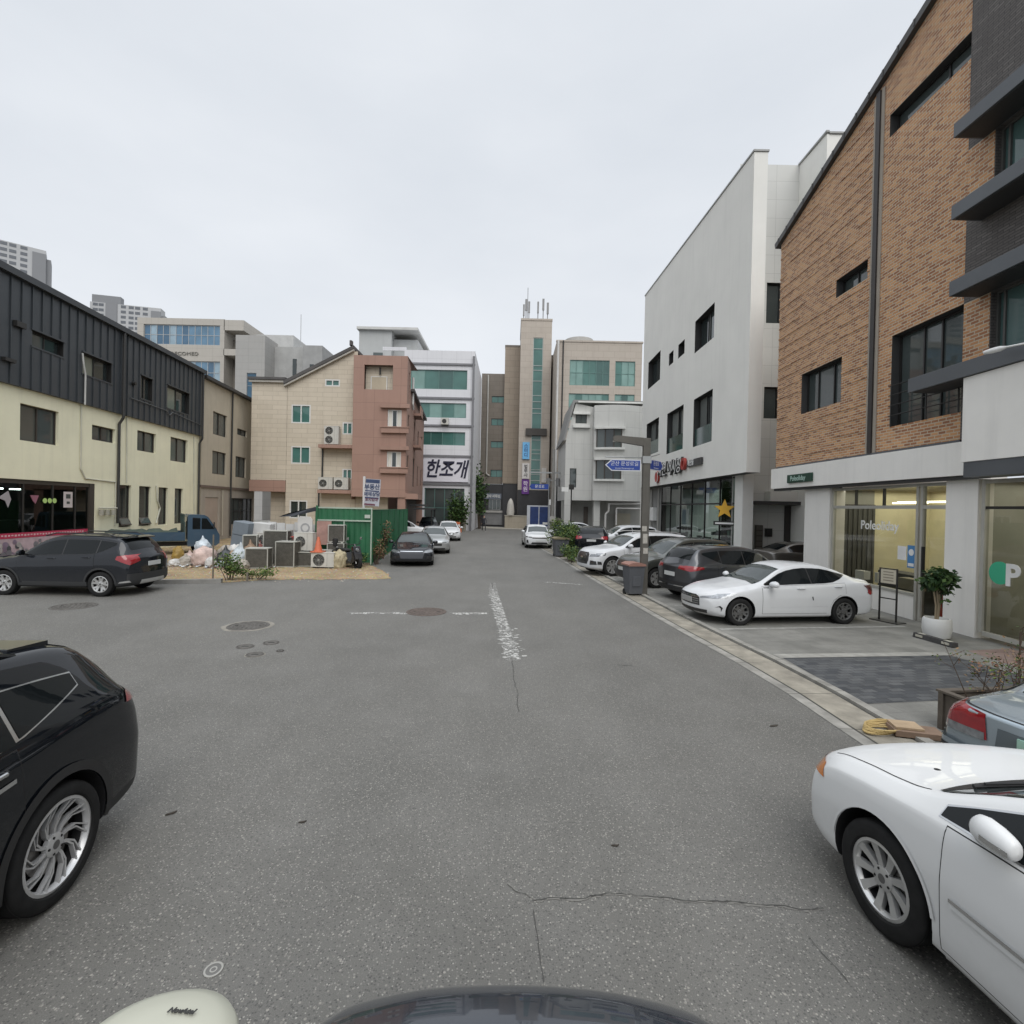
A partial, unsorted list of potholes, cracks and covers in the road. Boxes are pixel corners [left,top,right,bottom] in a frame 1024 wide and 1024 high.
crack [507,883,824,982]
manhole cover [220,620,275,632]
manhole cover [406,608,447,616]
manhole cover [48,602,99,610]
